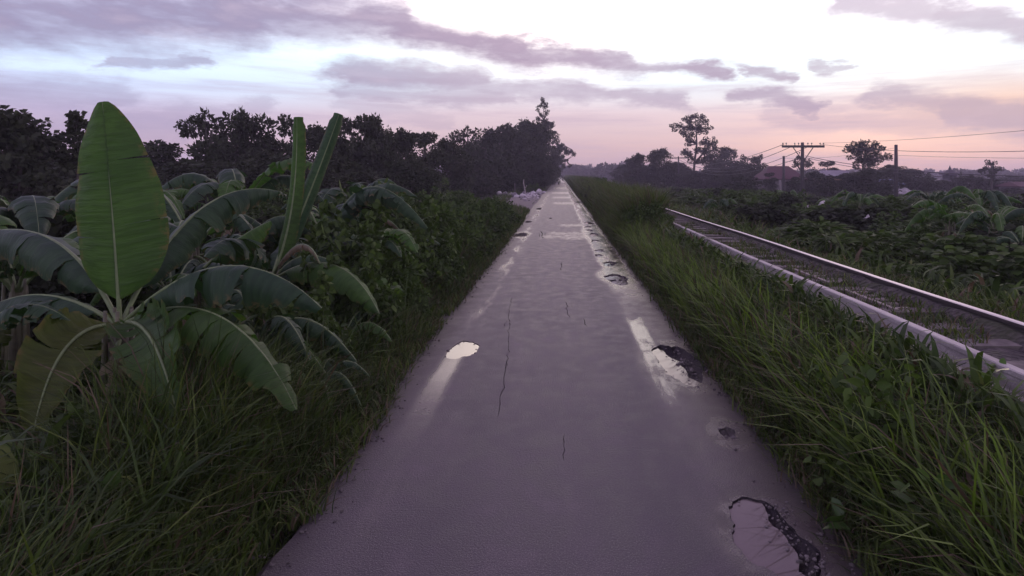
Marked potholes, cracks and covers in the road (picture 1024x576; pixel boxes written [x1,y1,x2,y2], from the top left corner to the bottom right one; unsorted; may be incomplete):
pothole [604,273,629,285]
pothole [445,340,480,359]
pothole [729,497,835,576]
pothole [651,344,708,387]
pothole [718,427,736,439]
crack [498,299,512,415]
